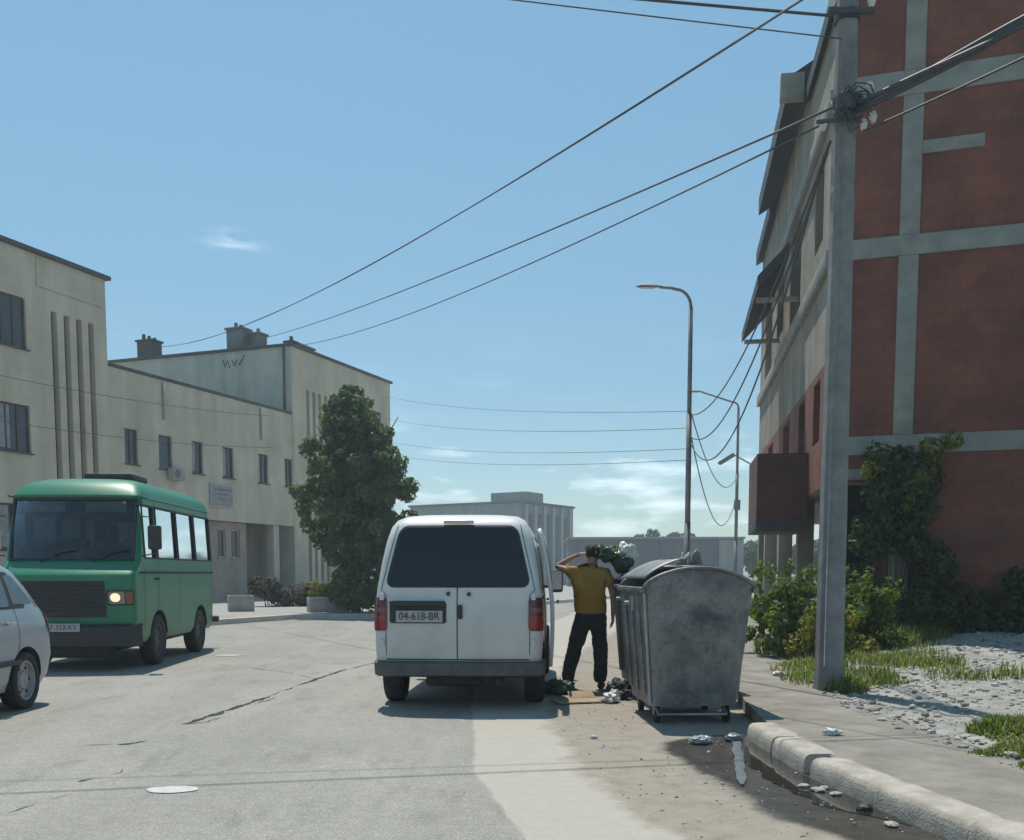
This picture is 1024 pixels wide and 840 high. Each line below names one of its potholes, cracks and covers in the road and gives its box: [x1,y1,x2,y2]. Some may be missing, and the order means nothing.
crack [183,662,374,724]
